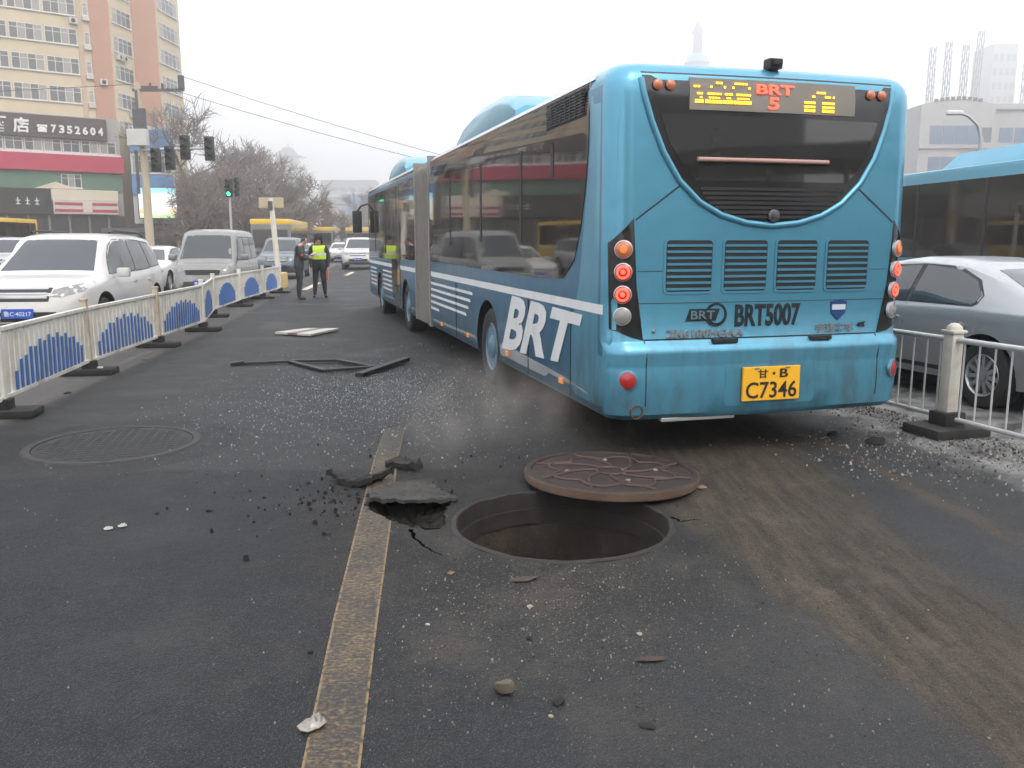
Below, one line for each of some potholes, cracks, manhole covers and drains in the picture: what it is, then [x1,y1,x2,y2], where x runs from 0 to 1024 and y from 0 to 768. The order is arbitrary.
pothole [367,501,451,528]
manhole cover [19,425,203,466]
crack [408,528,443,556]
manhole cover [524,451,700,503]
